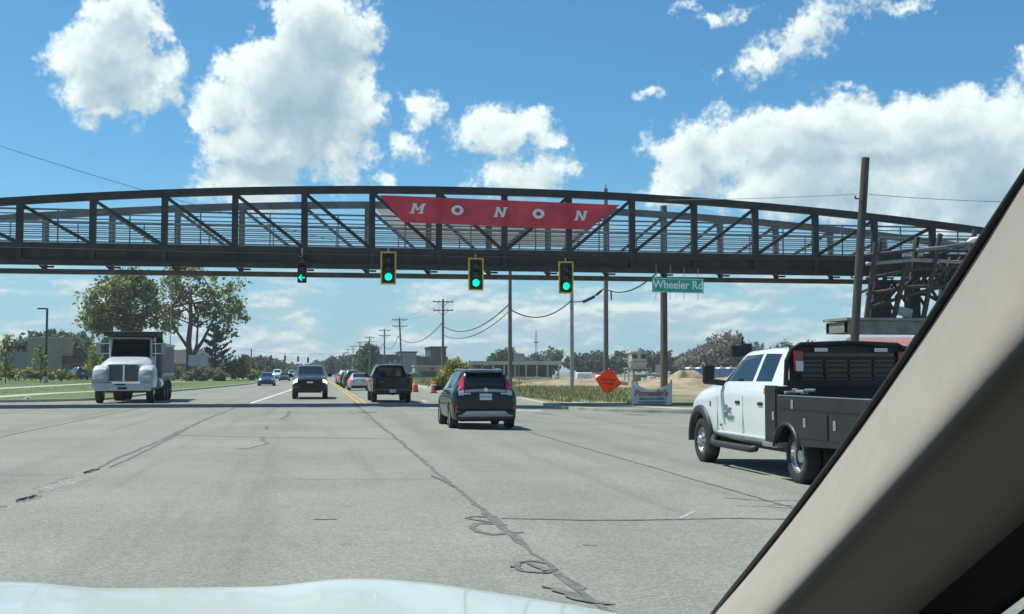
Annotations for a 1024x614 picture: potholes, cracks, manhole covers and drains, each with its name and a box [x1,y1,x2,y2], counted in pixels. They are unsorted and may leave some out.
crack [185,411,378,449]
